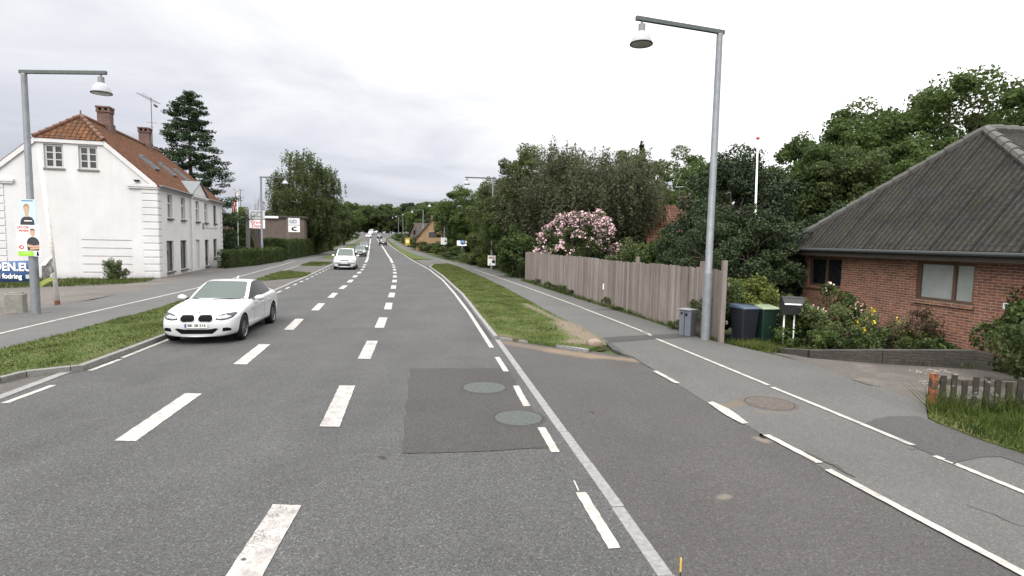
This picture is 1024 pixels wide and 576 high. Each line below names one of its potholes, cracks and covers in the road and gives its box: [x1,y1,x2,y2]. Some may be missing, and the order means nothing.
manhole cover [742,396,798,411]
manhole cover [491,410,546,427]
manhole cover [460,381,508,394]
crack [805,451,856,477]
